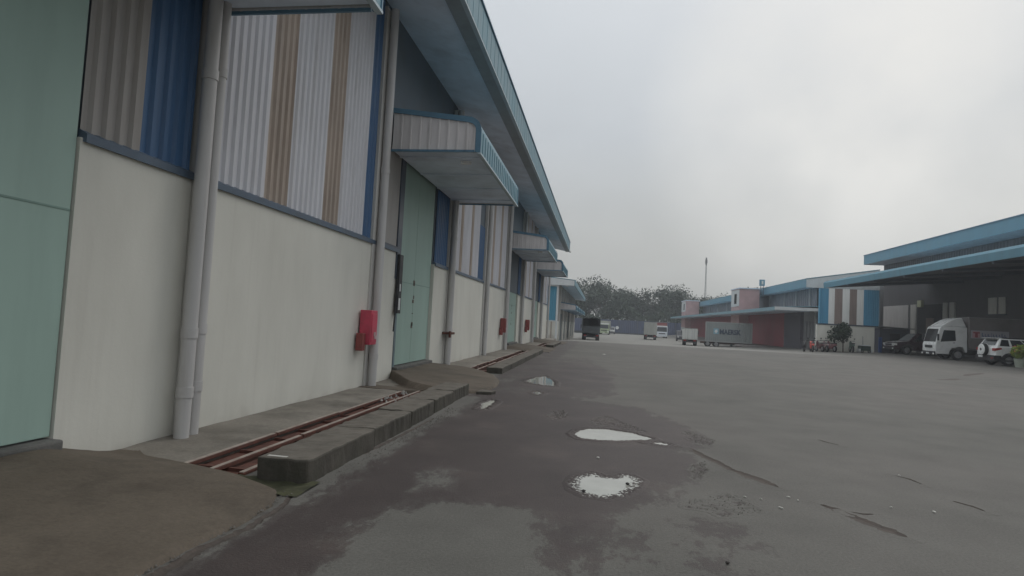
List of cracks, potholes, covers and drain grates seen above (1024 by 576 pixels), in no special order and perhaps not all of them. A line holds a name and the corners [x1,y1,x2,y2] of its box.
pothole [520,375,561,387]
pothole [564,427,663,443]
pothole [562,471,650,502]
pothole [471,398,504,411]
